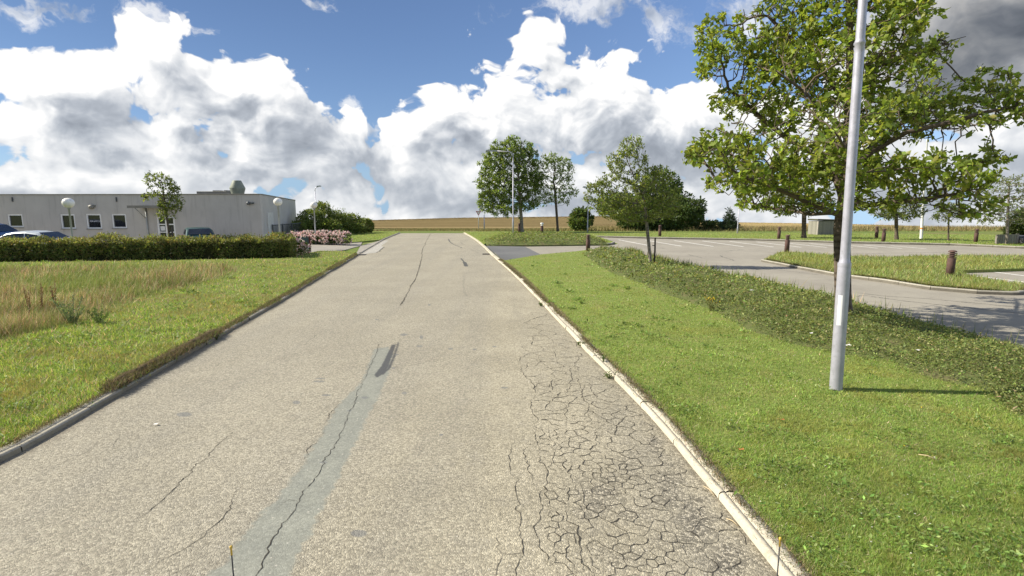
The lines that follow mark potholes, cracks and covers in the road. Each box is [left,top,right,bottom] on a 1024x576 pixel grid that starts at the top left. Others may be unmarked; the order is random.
crack [125,485,238,576]
crack [496,312,747,576]
crack [255,344,379,576]
crack [125,431,234,529]
